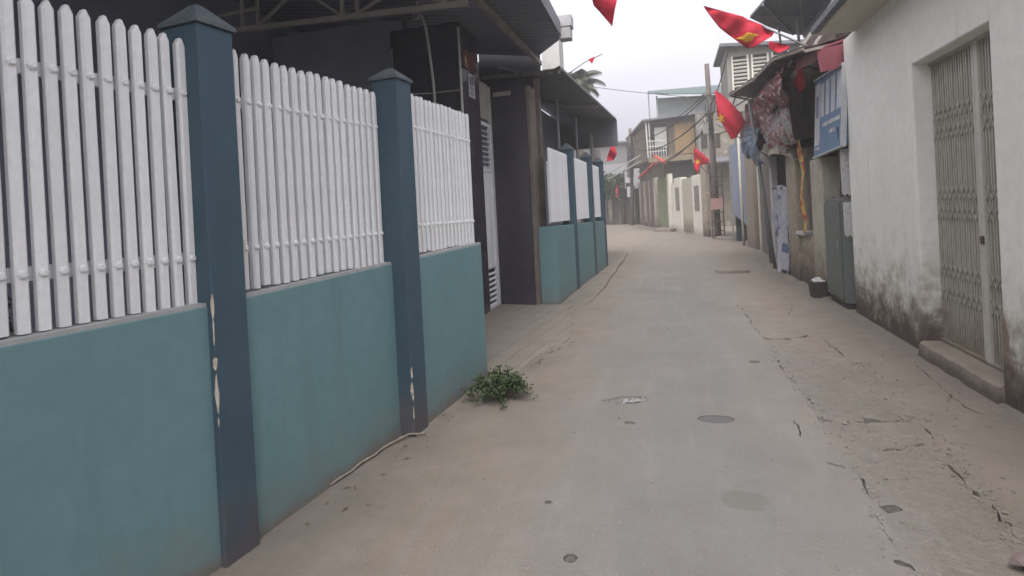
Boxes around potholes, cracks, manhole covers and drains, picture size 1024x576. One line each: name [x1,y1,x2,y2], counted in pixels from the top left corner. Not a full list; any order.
manhole cover [697,415,735,423]
crack [916,366,981,414]
crack [774,357,934,452]
crack [736,305,843,356]
